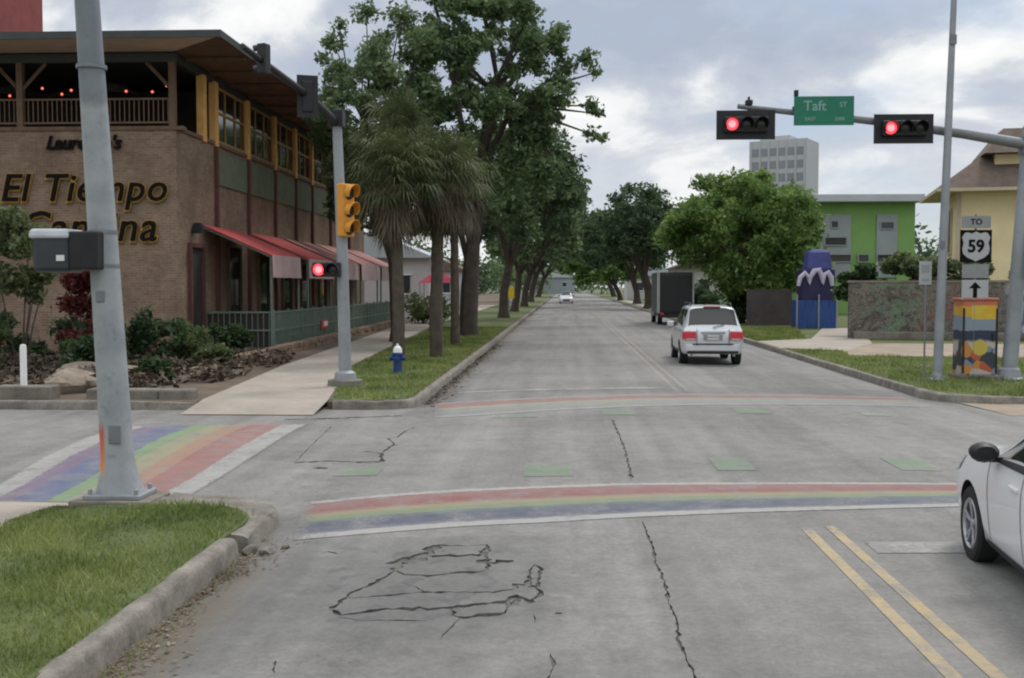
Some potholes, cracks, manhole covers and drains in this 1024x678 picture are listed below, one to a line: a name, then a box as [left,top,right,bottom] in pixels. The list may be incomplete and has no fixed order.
crack [642,522,697,678]
crack [611,420,634,479]
crack [285,416,412,463]
crack [547,653,556,678]
crack [327,544,544,638]
